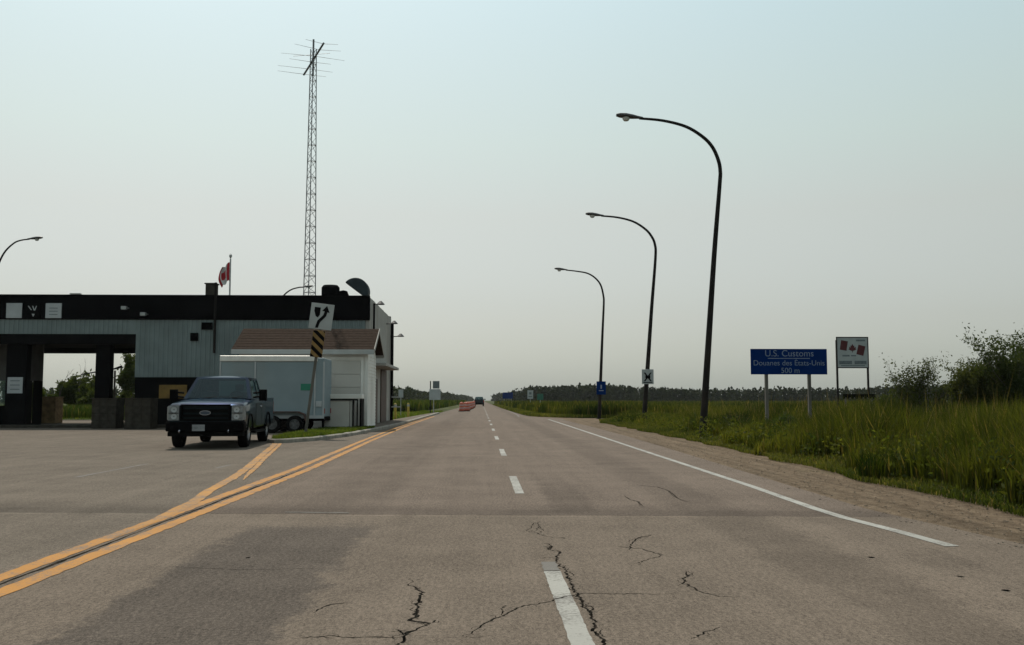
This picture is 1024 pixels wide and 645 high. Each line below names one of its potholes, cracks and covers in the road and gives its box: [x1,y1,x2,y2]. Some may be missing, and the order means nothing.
crack [307,579,439,645]
crack [463,522,660,645]
